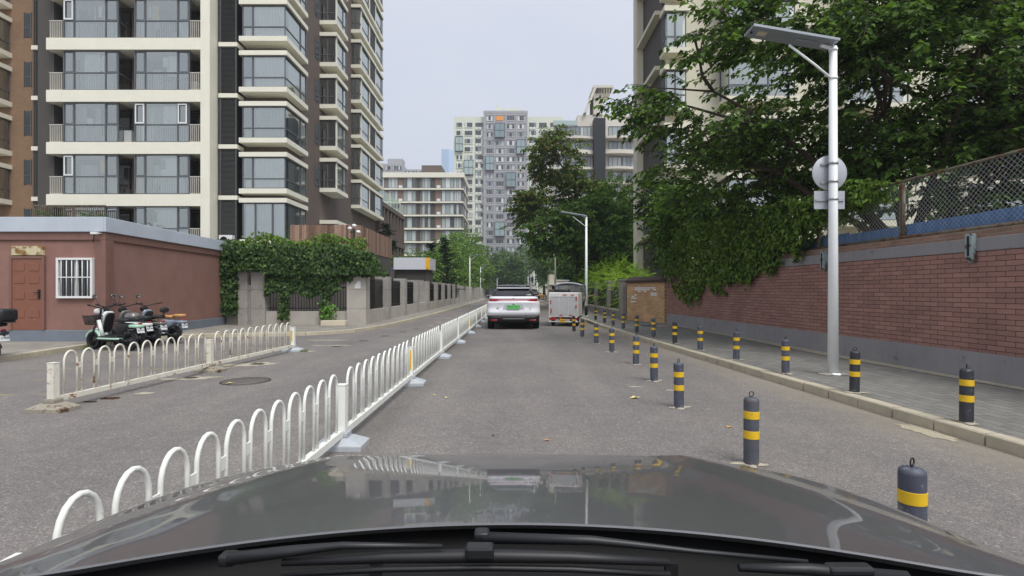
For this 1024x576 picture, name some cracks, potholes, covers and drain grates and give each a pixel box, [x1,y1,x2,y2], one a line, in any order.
manhole cover [219,377,271,385]
